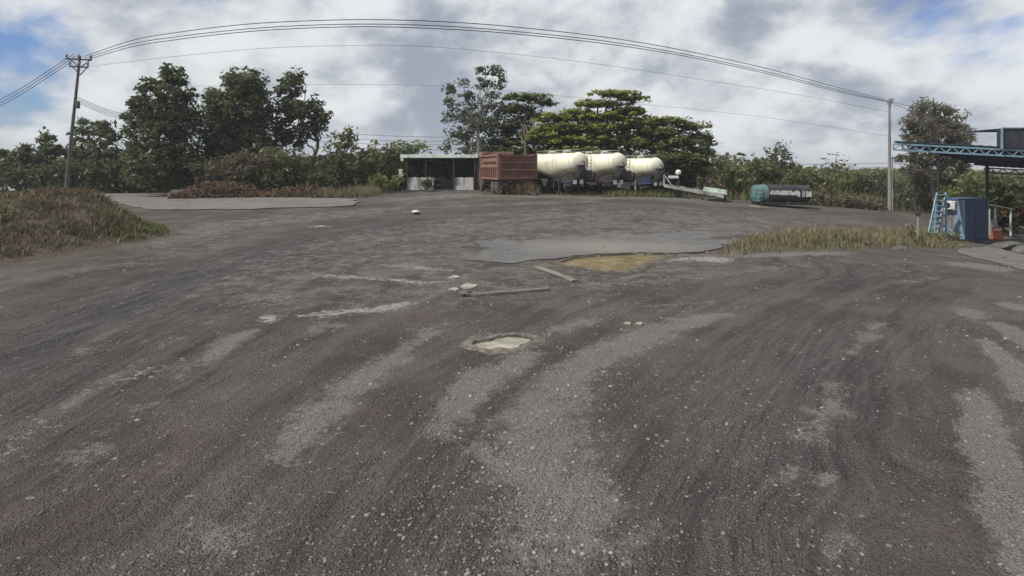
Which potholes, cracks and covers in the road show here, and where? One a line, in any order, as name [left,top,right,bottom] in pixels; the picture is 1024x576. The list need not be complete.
pothole [460,332,545,355]
pothole [555,253,674,273]
